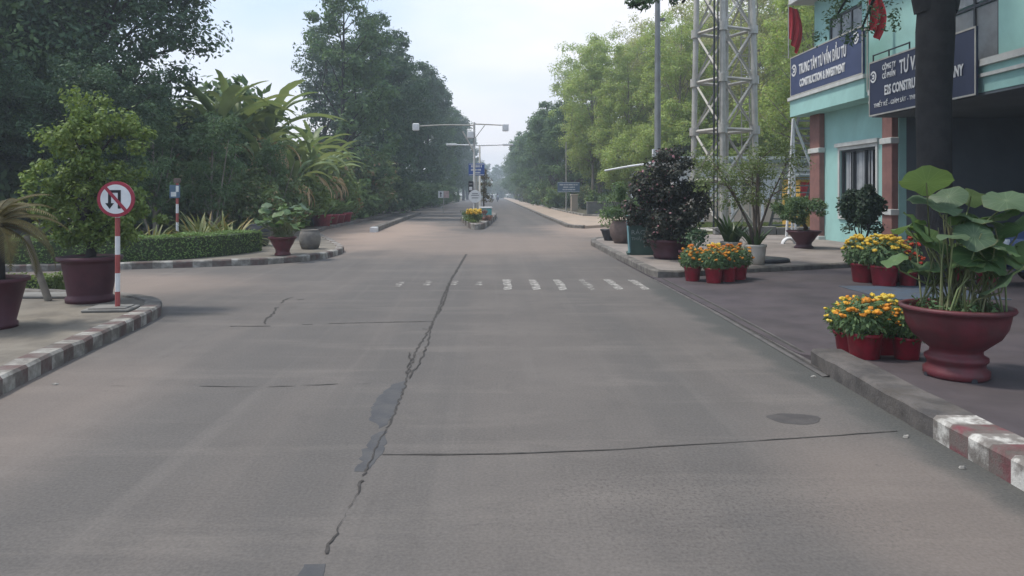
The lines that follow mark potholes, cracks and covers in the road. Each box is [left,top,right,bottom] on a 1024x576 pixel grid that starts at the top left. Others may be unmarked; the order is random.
crack [302,254,897,553]
